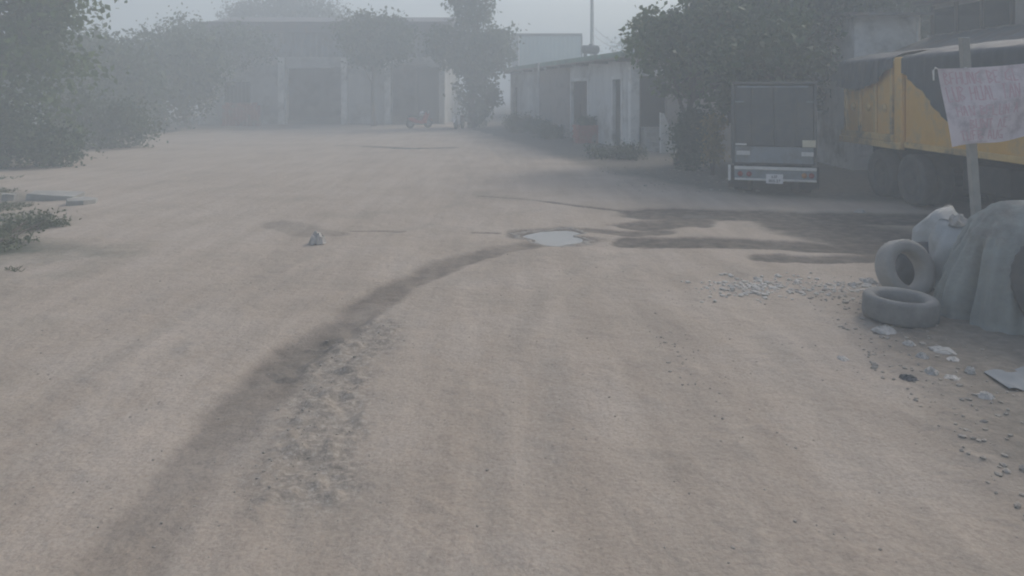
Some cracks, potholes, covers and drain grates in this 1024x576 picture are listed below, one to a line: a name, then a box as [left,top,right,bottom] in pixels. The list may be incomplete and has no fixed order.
pothole [508,226,595,248]
